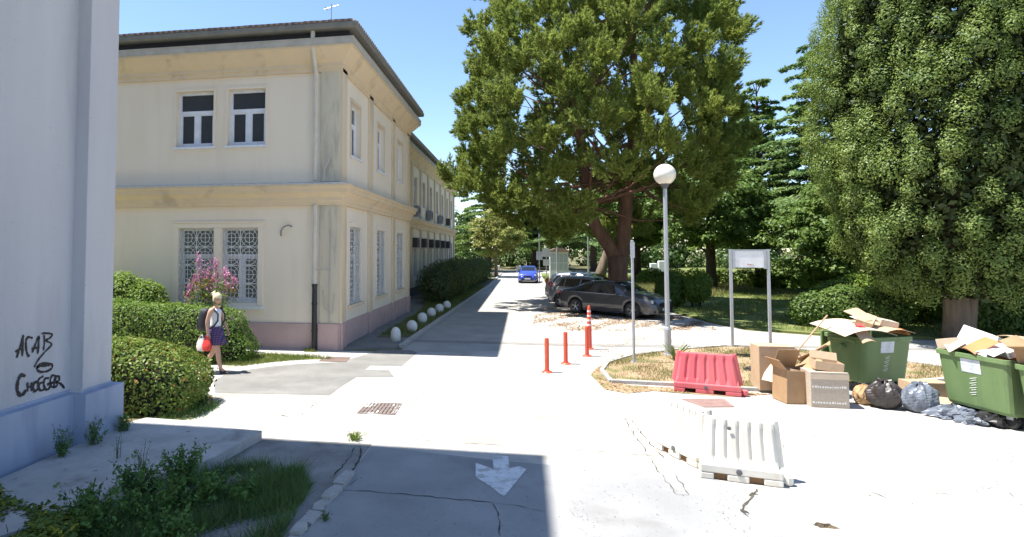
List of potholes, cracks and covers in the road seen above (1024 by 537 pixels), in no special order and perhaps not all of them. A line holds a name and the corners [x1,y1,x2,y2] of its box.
crack [379,418,689,495]
crack [740,488,758,517]
manhole cover [681,399,735,408]
drain grate [357,403,402,415]
